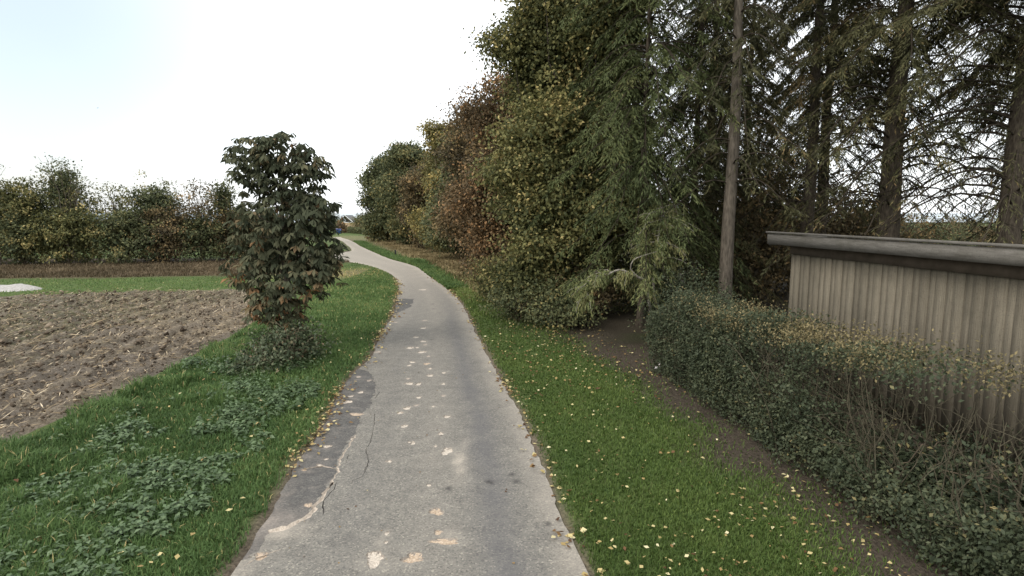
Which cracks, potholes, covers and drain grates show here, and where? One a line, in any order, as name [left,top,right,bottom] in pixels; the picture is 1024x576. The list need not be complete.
crack [244,414,375,566]
